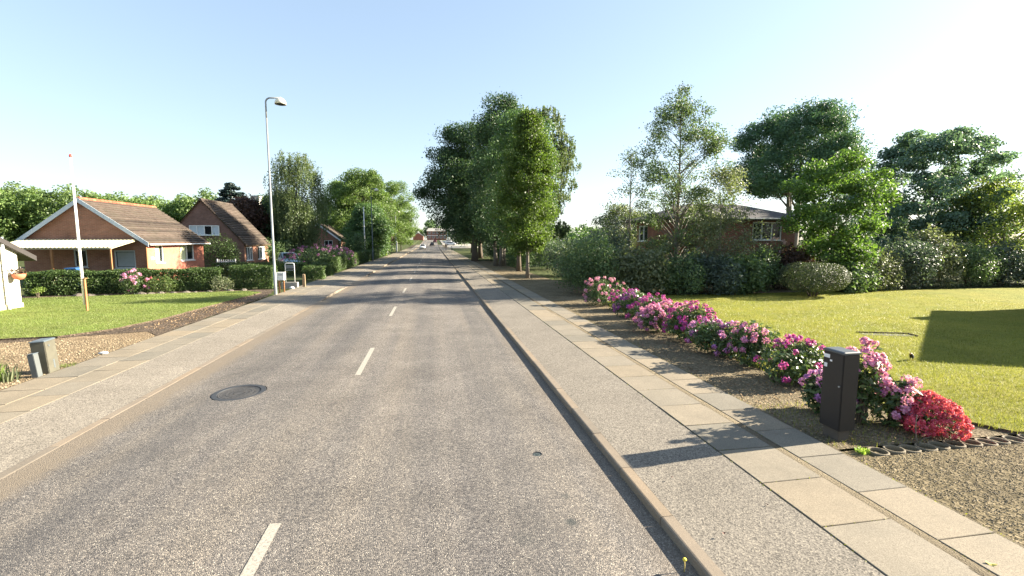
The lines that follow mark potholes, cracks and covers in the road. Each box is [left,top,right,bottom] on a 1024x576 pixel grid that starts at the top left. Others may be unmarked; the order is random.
manhole cover [211,384,266,401]
